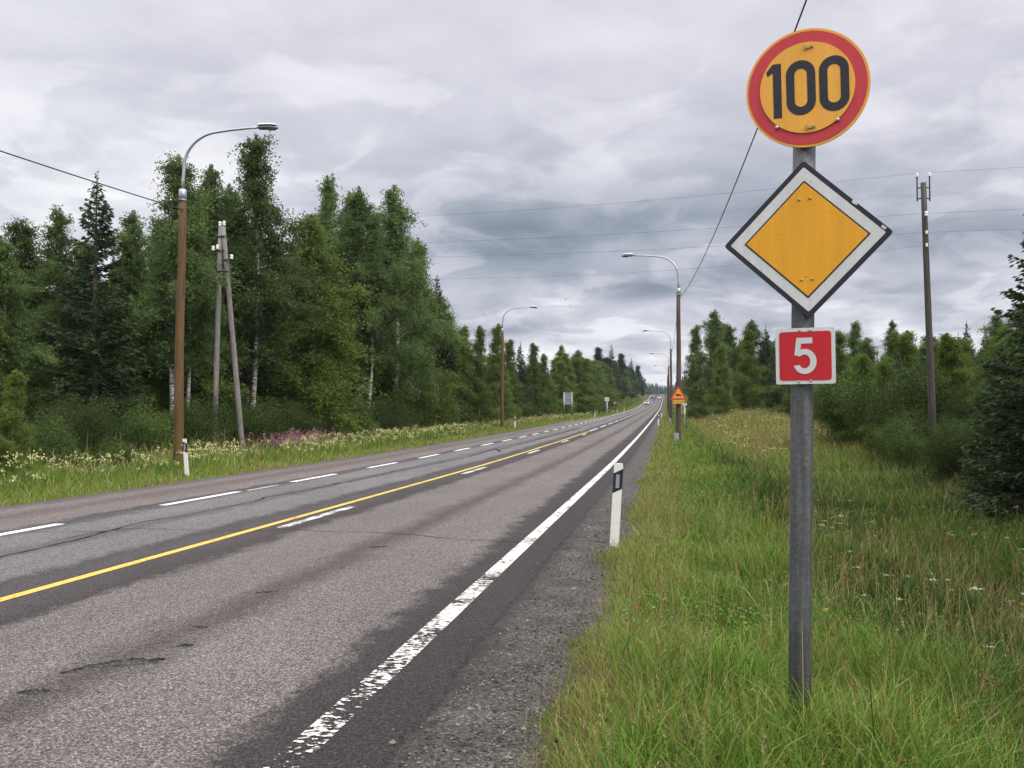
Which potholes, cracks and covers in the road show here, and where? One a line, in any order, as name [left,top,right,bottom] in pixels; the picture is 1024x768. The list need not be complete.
pothole [59,657,165,674]
